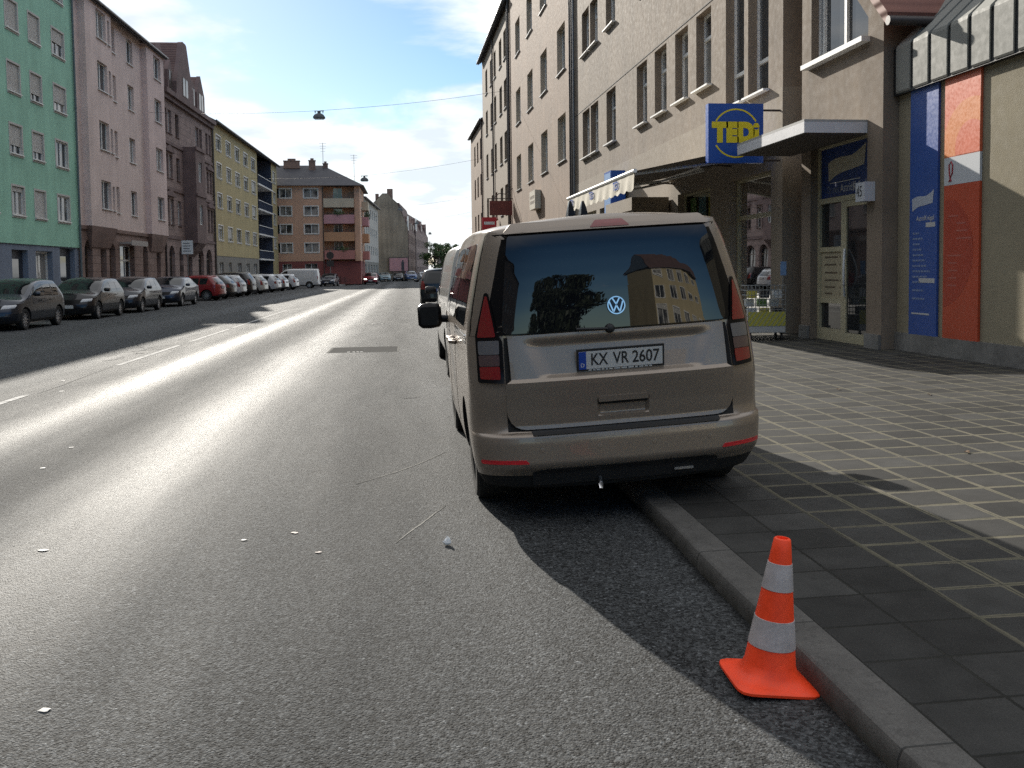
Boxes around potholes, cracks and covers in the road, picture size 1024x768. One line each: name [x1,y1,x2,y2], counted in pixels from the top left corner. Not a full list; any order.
crack [396,506,445,543]
crack [358,452,445,484]
